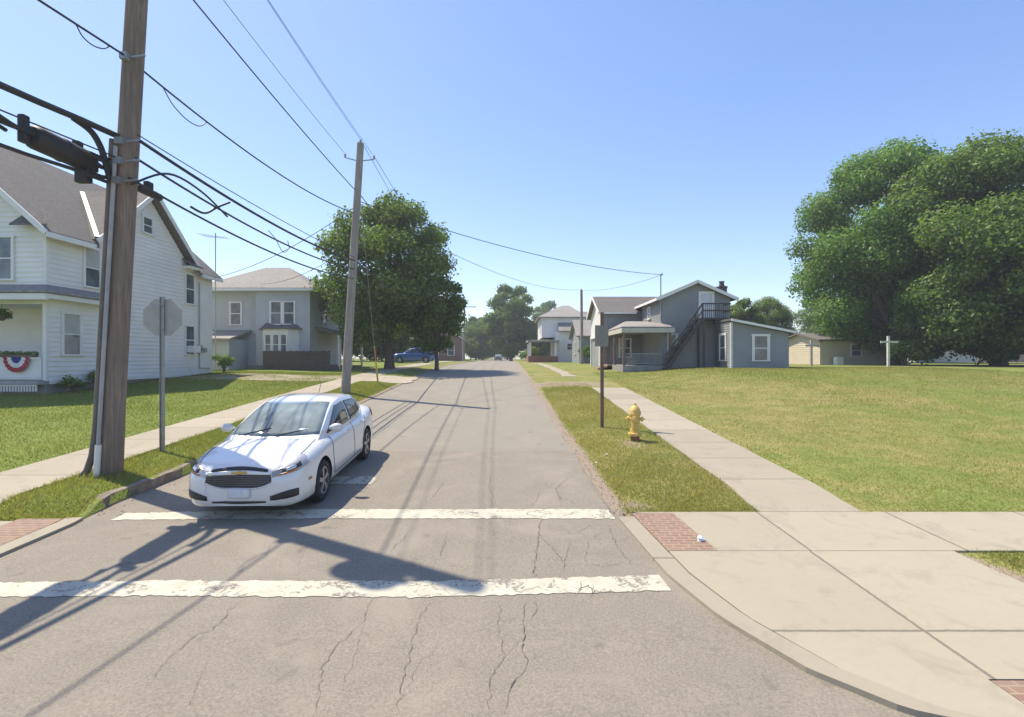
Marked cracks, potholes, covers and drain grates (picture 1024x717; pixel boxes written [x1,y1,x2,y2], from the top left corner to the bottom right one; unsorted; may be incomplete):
crack [395,588,478,711]
crack [315,597,374,712]
crack [486,481,633,711]
